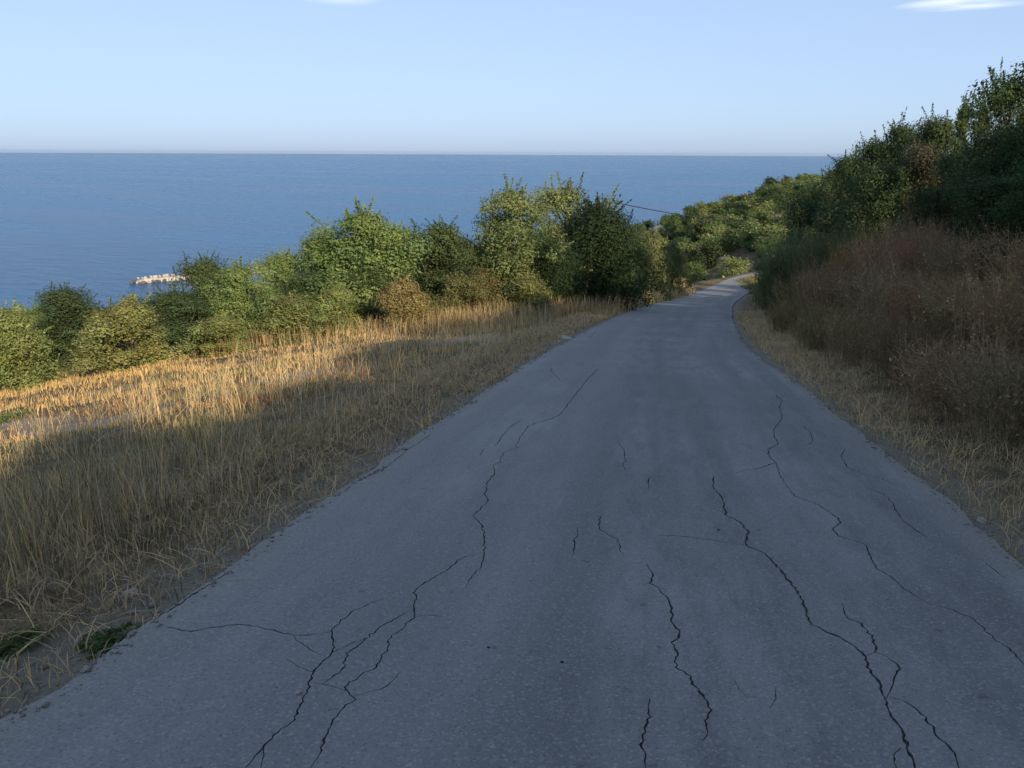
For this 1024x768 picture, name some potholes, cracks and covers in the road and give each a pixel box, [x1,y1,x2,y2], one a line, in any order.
crack [150,370,597,768]
crack [741,395,1024,665]
crack [663,475,960,768]
crack [639,565,712,768]
